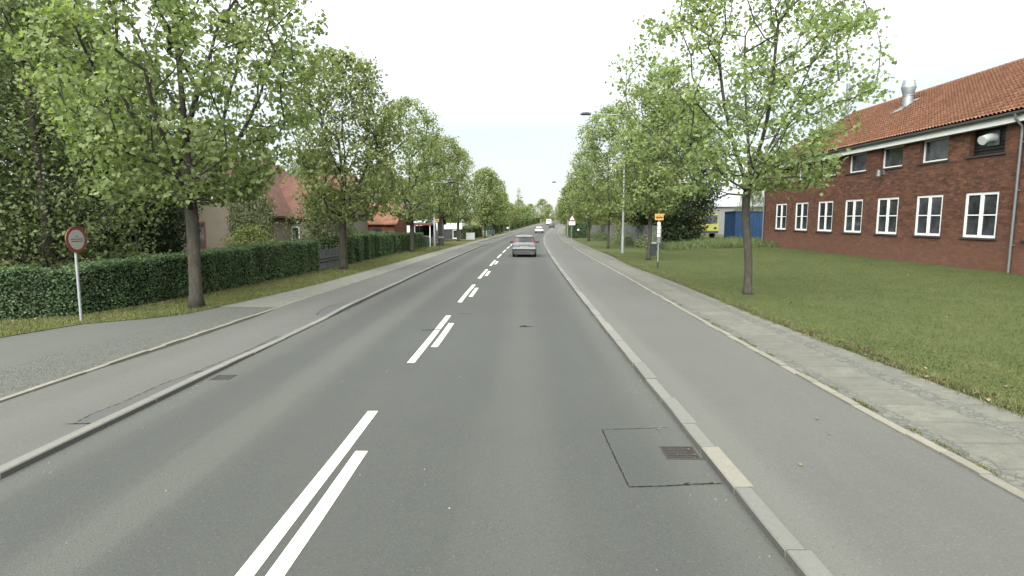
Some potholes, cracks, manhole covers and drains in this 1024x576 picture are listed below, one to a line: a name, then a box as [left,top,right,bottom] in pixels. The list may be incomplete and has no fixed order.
drain grate [659,446,702,460]
